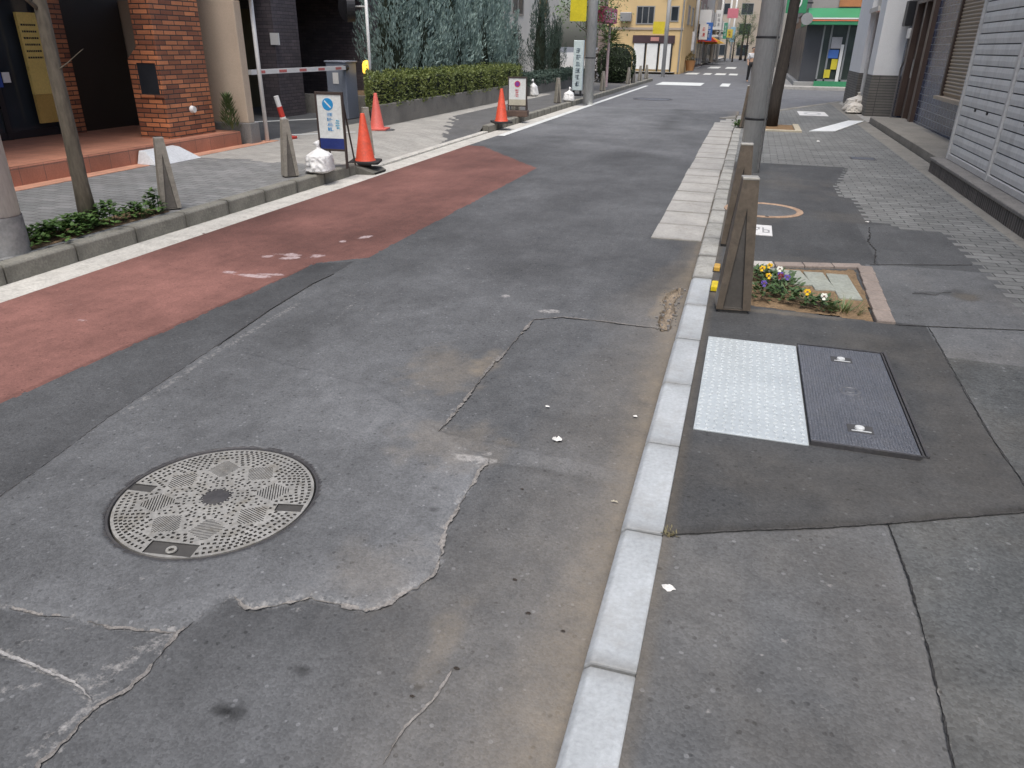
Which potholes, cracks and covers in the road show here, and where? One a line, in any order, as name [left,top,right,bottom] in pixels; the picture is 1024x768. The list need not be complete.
manhole cover [724,202,803,218]
crack [867,227,925,265]
pothole [655,287,686,332]
manhole cover [102,446,322,562]
crack [383,671,452,764]
crack [0,606,202,768]
crack [439,317,663,431]
utility cover [797,343,930,461]
